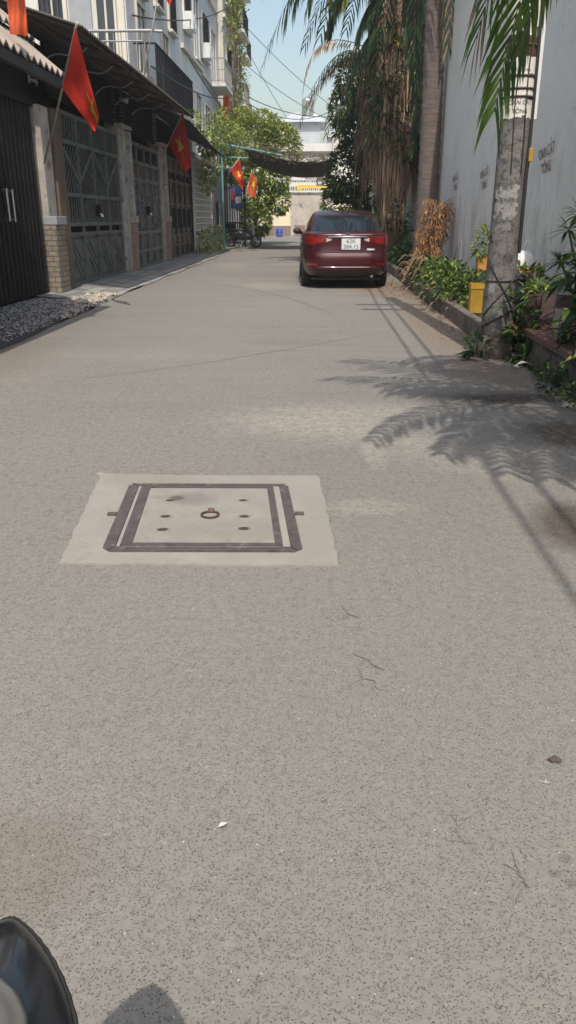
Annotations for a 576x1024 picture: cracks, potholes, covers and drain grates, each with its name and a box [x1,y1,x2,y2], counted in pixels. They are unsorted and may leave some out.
crack [447,810,485,844]
crack [502,847,530,900]
manhole cover [59,472,340,567]
crack [354,653,385,695]
